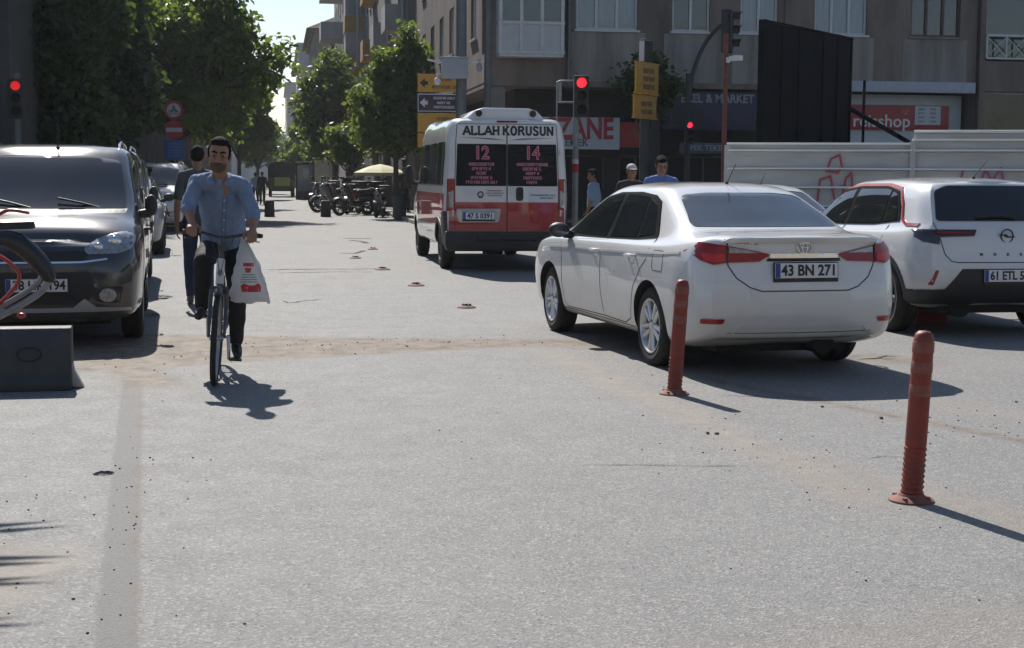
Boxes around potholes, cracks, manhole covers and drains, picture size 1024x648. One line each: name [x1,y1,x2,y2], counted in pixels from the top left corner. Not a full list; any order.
crack [267,238,376,273]
